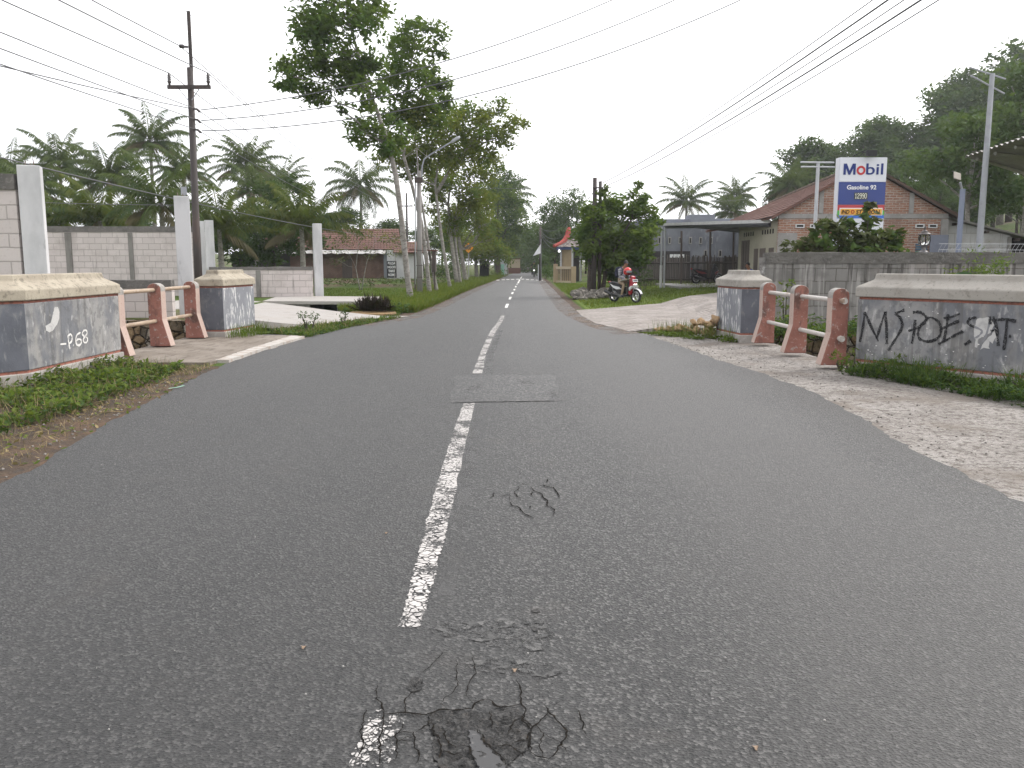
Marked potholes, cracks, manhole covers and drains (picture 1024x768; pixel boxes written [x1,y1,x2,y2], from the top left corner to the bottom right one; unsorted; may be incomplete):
crack [355,652,586,764]
pothole [429,709,531,768]
crack [492,479,560,518]
